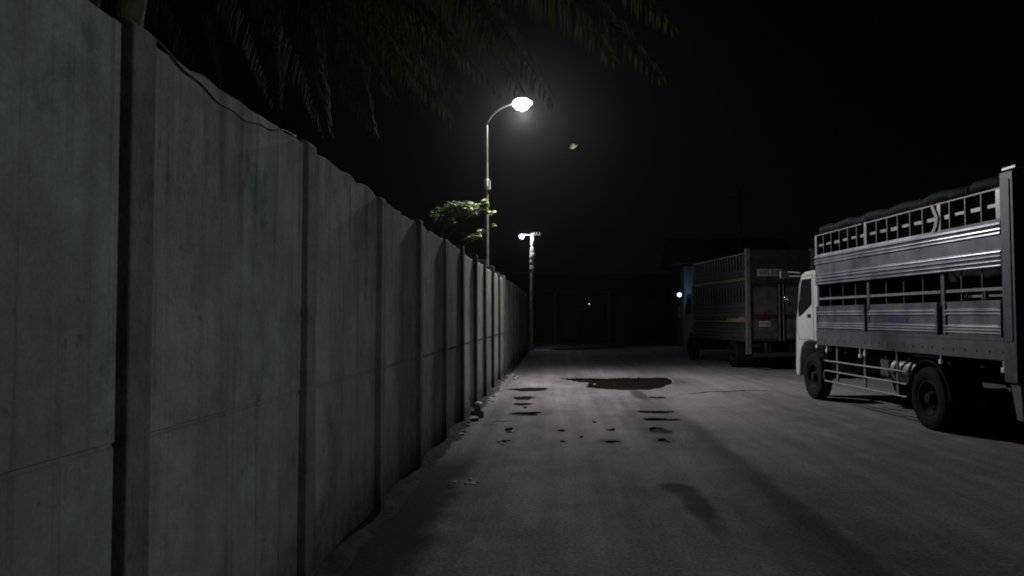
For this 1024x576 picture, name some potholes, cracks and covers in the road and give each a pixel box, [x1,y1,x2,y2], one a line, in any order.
pothole [559,377,673,390]
